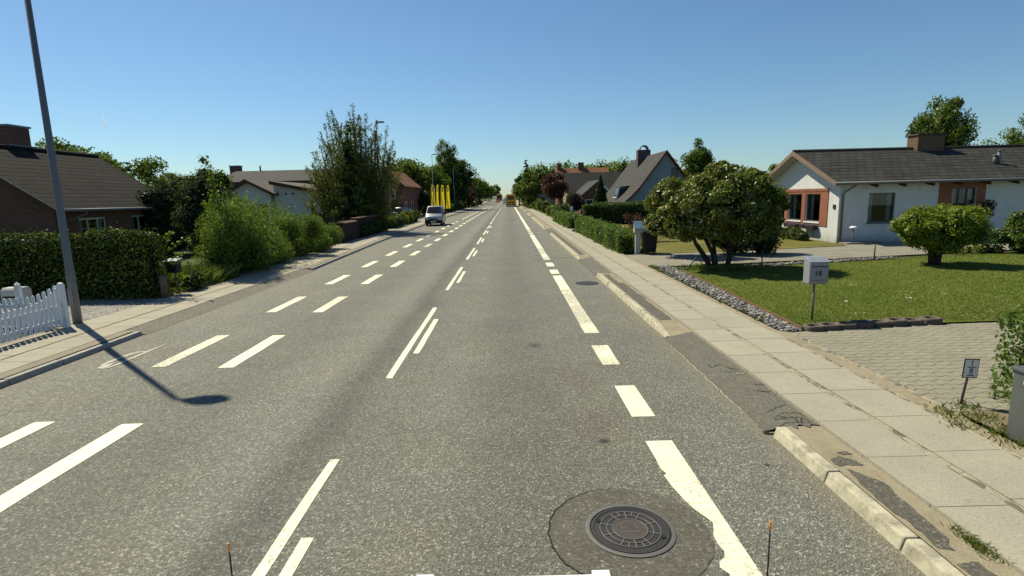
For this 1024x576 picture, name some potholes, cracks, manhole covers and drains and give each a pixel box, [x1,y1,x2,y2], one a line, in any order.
crack [709,365,810,426]
manhole cover [585,504,677,558]
